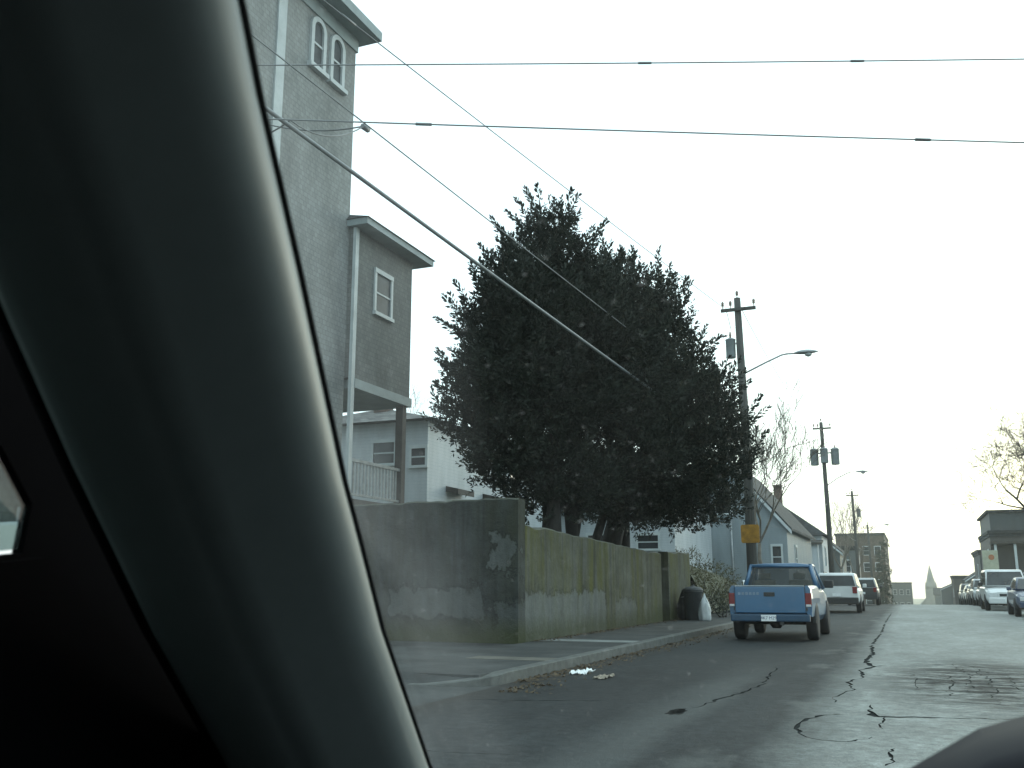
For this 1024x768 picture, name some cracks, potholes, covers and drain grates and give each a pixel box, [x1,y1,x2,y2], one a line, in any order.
crack [695,669,777,708]
crack [794,614,1024,742]
